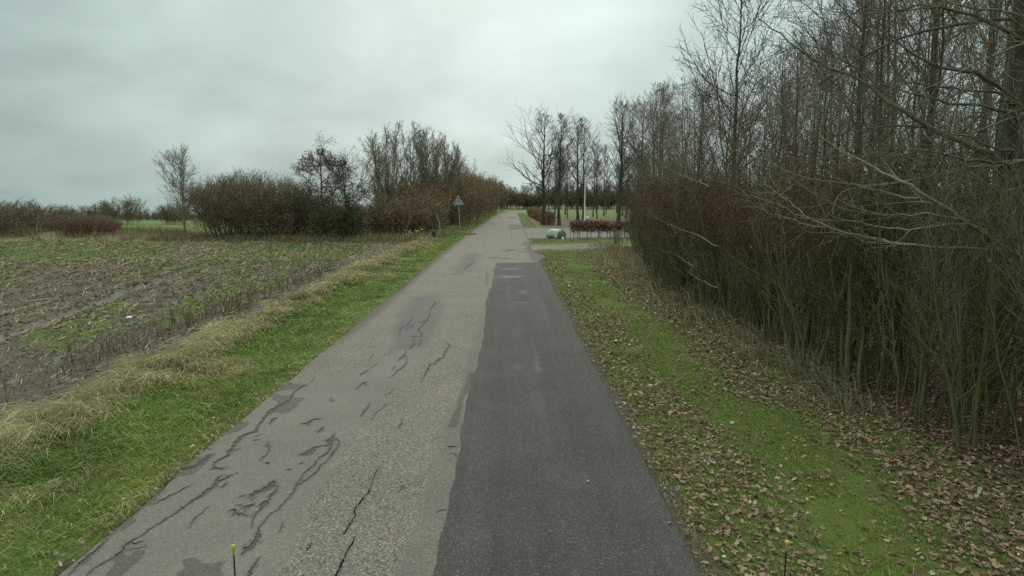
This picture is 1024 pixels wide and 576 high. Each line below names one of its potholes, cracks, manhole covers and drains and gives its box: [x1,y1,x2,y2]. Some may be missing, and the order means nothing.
crack [54,378,340,576]
crack [357,302,450,428]
crack [335,466,382,576]
